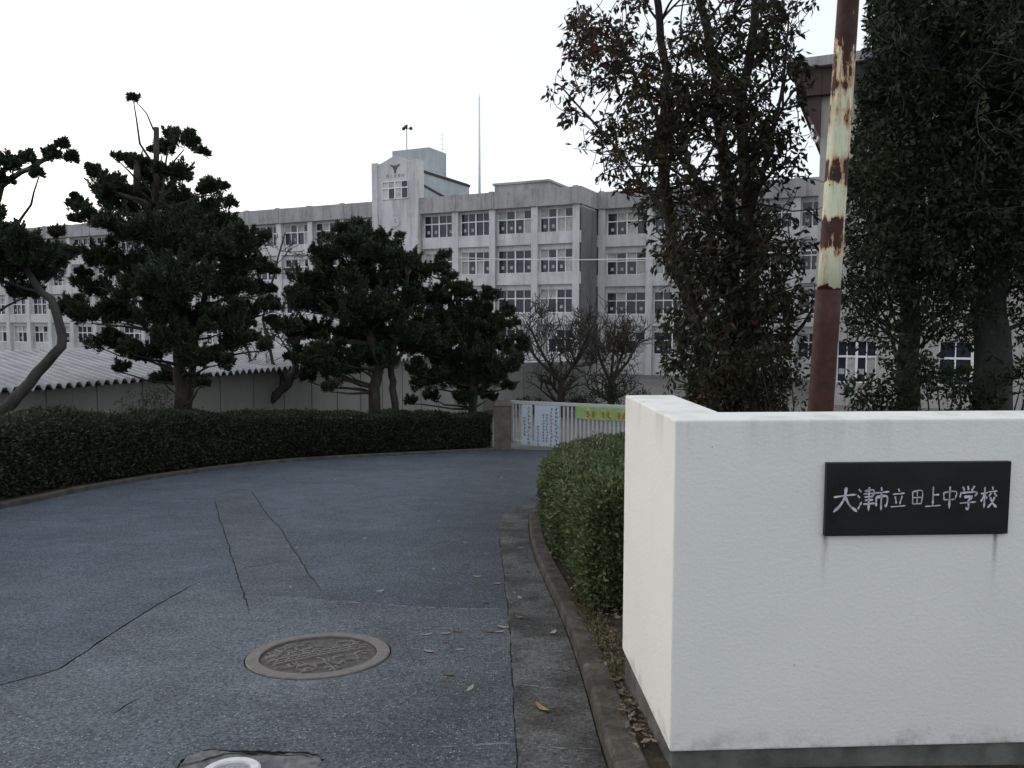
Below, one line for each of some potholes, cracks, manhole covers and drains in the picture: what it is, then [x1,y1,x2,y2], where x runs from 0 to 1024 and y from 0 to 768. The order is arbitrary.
crack [0,583,196,685]
manhole cover [245,632,390,680]
utility cover [205,757,261,768]
